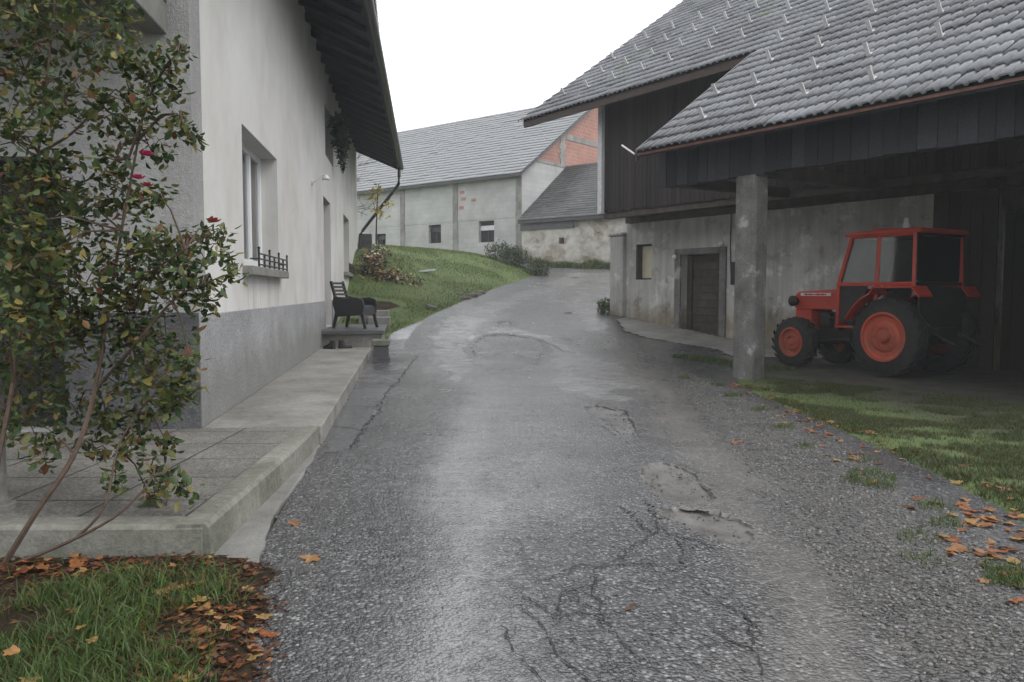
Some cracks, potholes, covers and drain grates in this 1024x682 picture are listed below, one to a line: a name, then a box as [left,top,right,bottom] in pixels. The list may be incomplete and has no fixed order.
crack [693,583,763,681]
pothole [625,459,730,511]
crack [501,500,711,681]
pothole [640,501,776,551]
crack [324,355,418,453]
